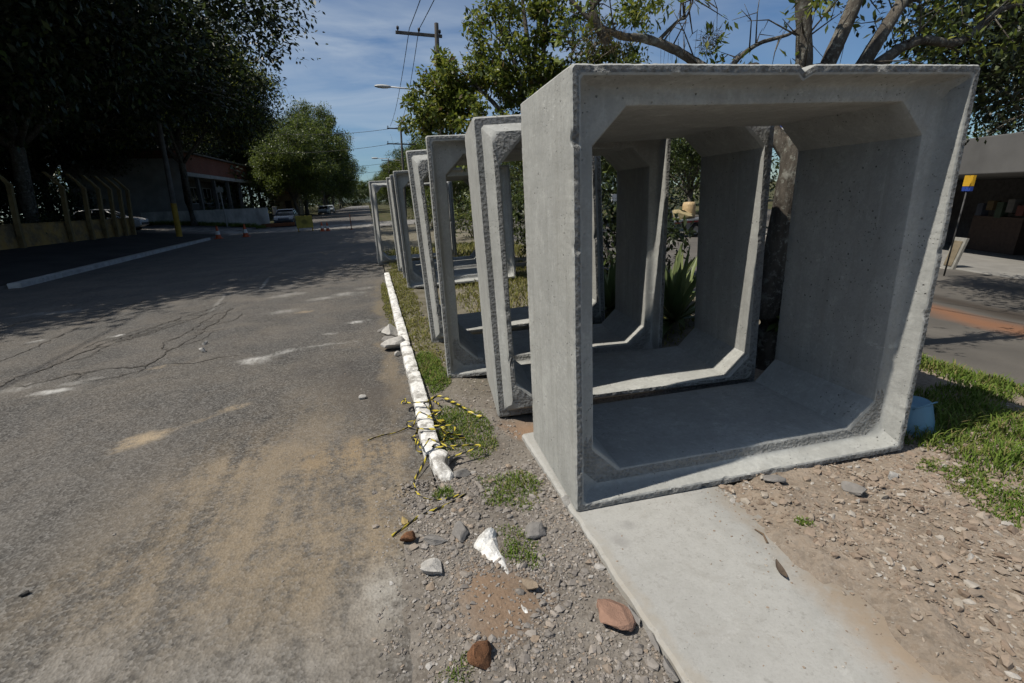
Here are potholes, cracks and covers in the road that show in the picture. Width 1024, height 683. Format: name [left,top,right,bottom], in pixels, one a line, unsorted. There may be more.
crack [0,302,242,387]
